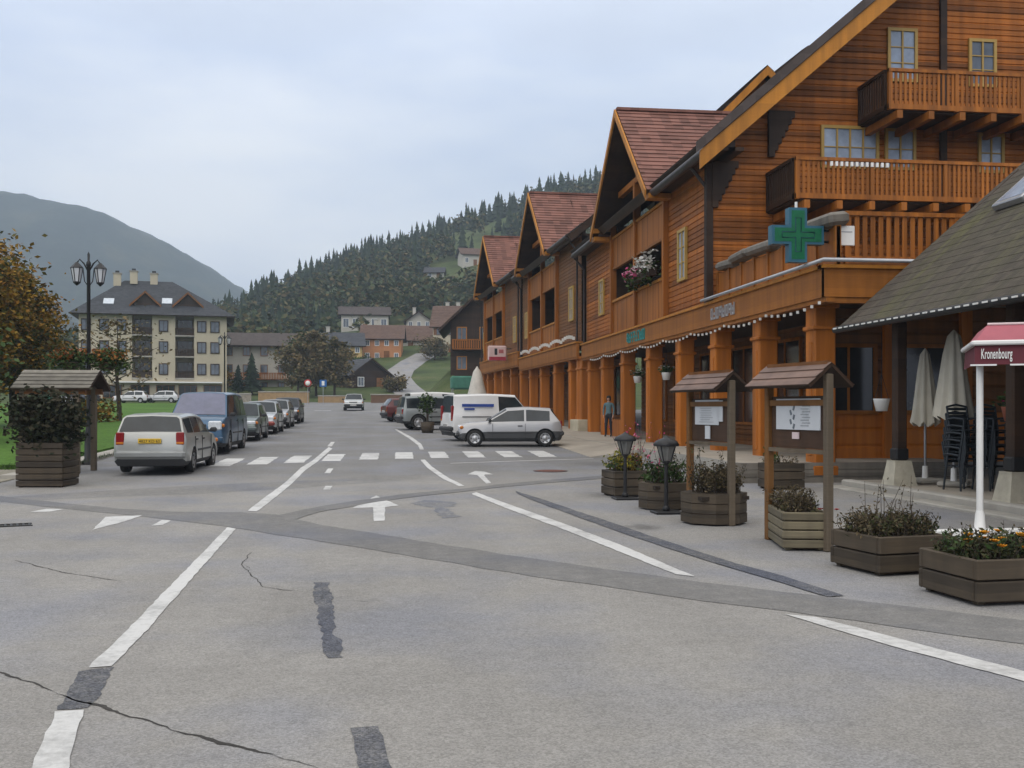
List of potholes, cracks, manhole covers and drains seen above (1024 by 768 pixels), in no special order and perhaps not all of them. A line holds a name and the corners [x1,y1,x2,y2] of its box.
crack [0,672,312,766]
